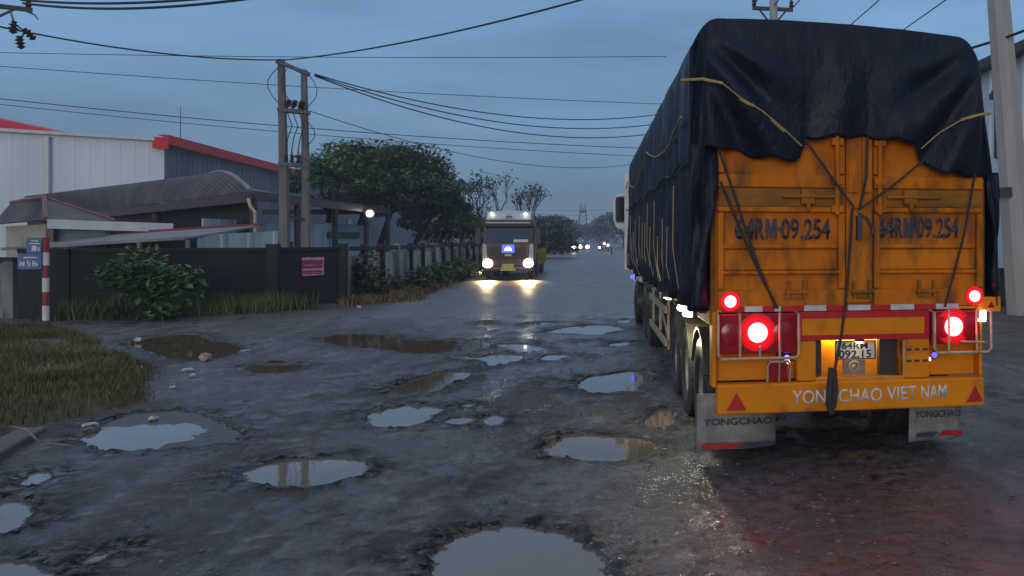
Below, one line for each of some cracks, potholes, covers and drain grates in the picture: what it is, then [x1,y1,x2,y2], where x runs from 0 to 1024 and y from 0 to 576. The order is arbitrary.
pothole [240,456,370,487]
pothole [448,353,525,365]
pothole [315,333,461,354]
pothole [535,324,625,335]
pothole [0,499,36,533]
pothole [16,469,54,485]
pothole [542,433,659,461]
pothole [379,370,472,398]
pothole [242,363,309,373]
pothole [427,523,609,576]
pothole [364,404,445,427]
pothole [642,408,677,427]
